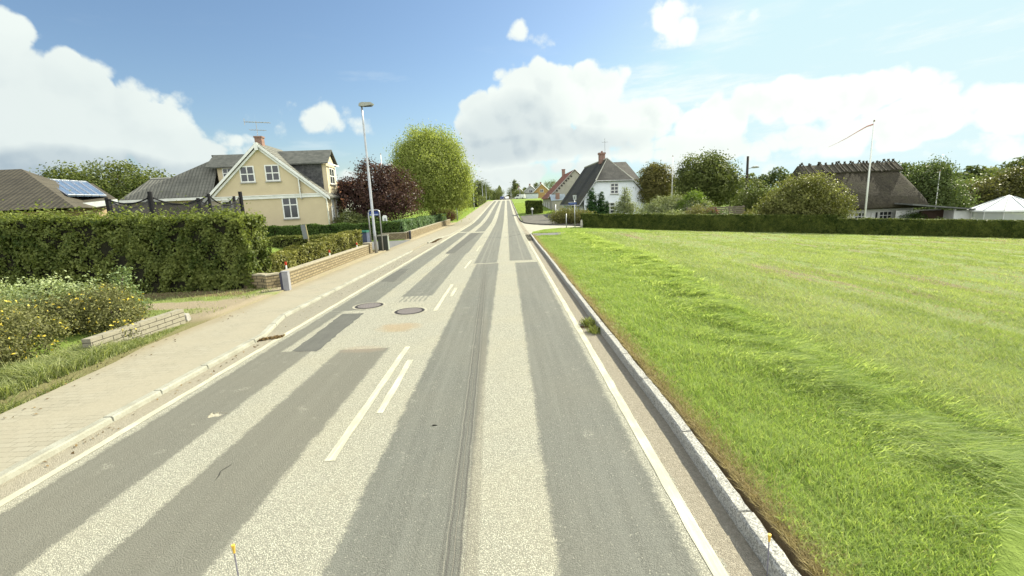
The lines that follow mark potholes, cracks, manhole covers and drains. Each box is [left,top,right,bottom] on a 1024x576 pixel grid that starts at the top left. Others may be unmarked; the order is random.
manhole cover [352,302,386,310]
manhole cover [392,307,427,315]
